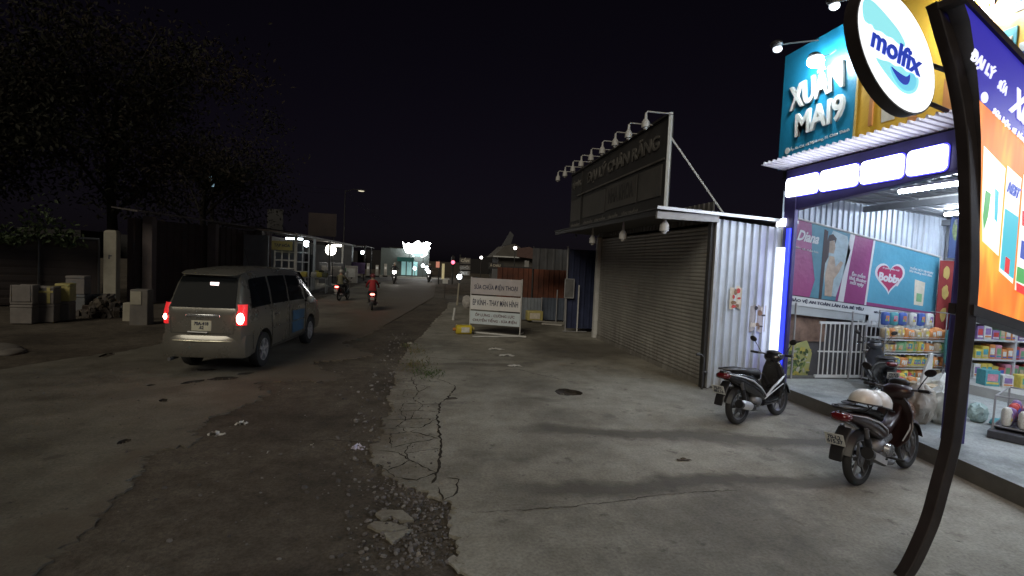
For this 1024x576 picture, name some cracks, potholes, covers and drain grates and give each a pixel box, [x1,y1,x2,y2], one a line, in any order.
crack [379,360,459,500]
crack [472,490,737,513]
